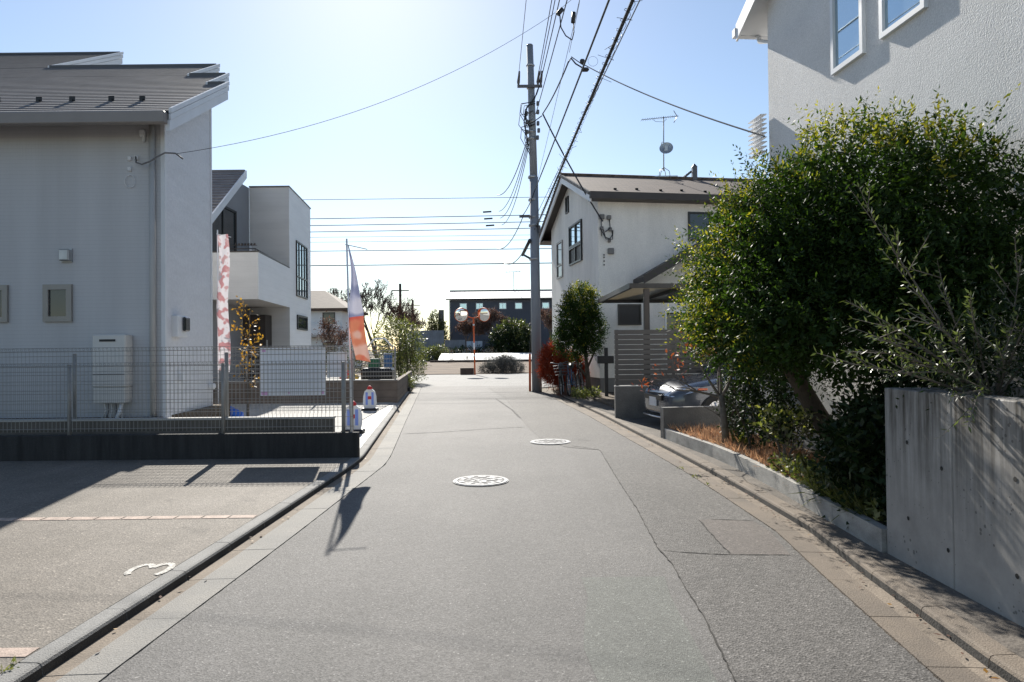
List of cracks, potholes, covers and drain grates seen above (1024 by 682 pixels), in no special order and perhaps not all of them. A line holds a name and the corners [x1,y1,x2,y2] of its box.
manhole cover [453,475,509,486]
crack [573,439,785,682]
